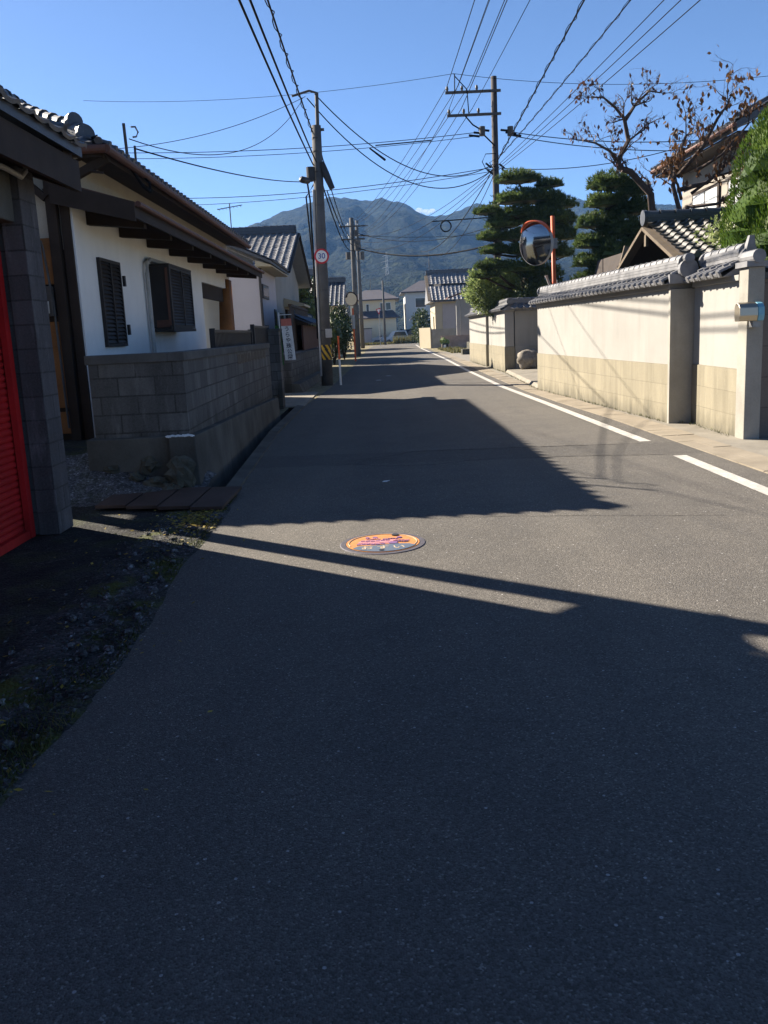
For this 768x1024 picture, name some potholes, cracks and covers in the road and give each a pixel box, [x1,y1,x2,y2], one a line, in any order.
manhole cover [340,533,426,555]
